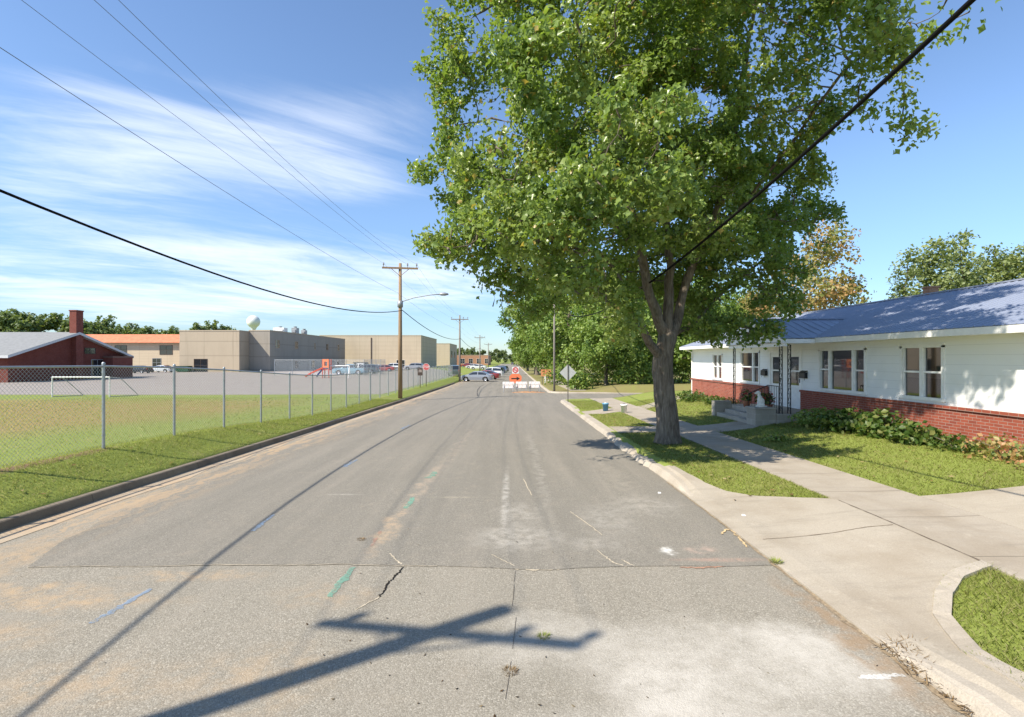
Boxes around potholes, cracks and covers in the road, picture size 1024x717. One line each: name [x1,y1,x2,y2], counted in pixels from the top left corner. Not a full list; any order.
crack [356,553,403,610]
